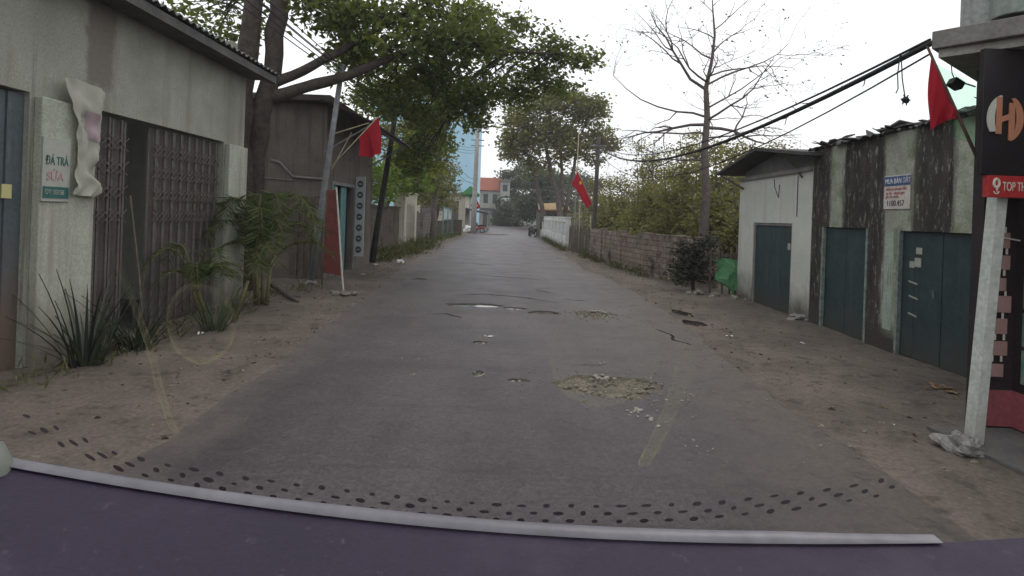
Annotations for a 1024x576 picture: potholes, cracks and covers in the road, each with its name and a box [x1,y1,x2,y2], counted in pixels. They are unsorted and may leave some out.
pothole [552,375,664,400]
crack [657,329,693,346]
